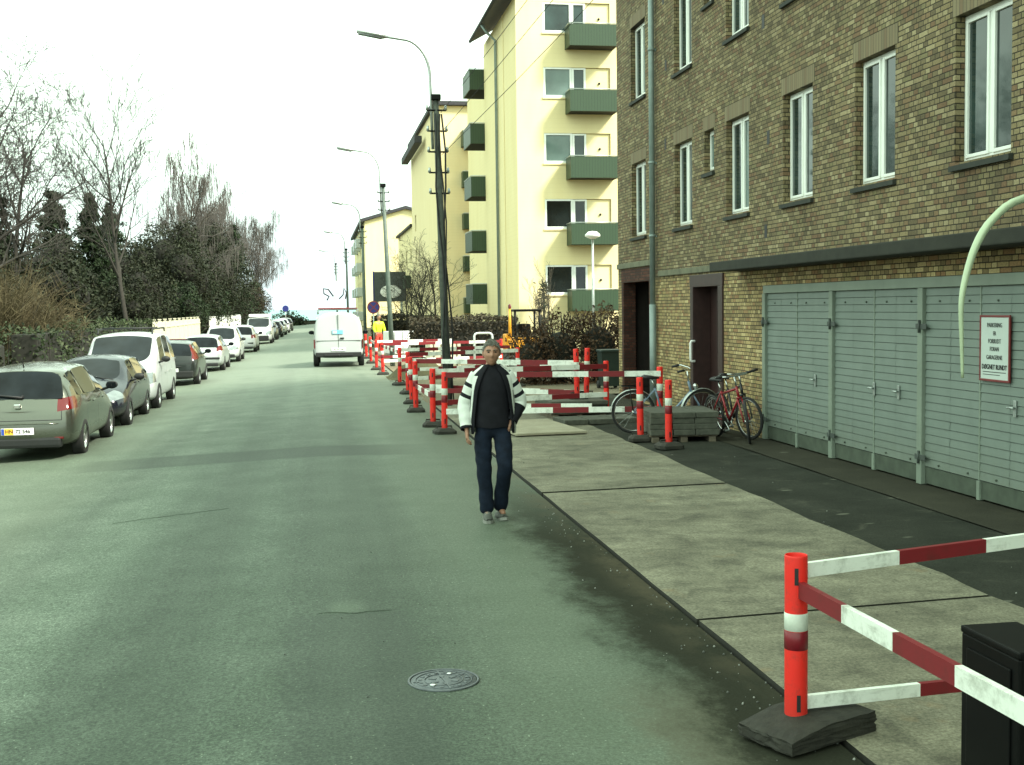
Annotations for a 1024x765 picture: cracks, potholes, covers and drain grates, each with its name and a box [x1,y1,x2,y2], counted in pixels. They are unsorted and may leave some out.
manhole cover [408,668,480,692]
